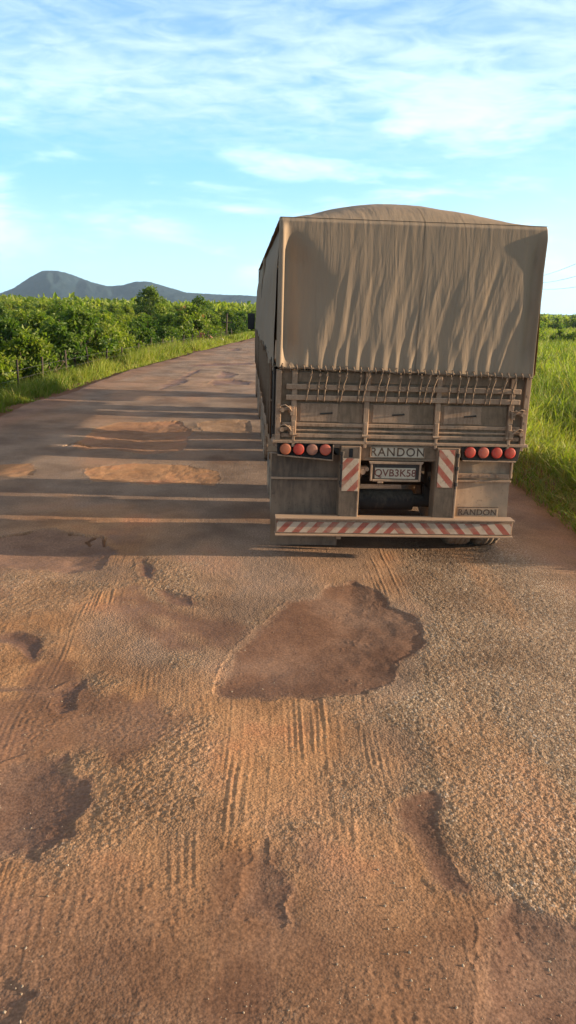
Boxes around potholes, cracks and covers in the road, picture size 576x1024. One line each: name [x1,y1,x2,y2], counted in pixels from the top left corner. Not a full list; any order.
pothole [0,750,92,863]
pothole [0,629,42,661]
pothole [386,789,469,893]
pothole [211,581,426,702]
pothole [230,835,292,928]
